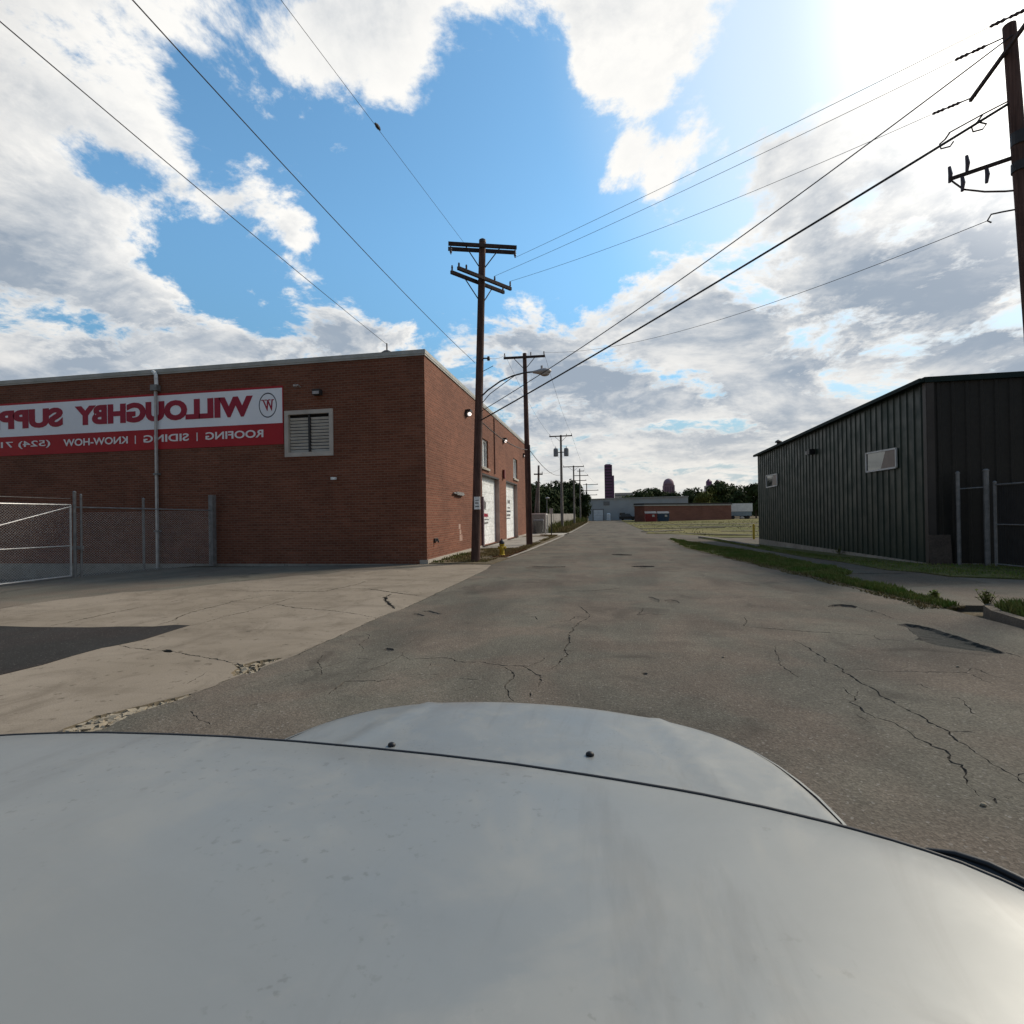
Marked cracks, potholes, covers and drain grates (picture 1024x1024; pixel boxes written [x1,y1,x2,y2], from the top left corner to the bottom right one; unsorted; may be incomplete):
crack [51,571,615,725]
crack [743,619,1024,803]
